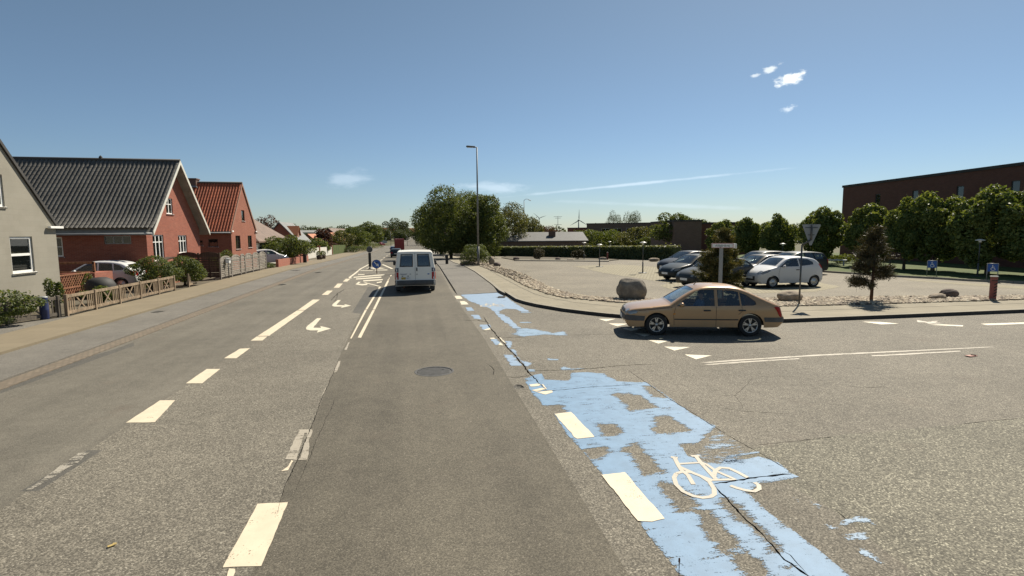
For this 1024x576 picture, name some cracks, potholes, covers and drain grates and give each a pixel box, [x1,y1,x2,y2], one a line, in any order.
manhole cover [414,366,454,377]
